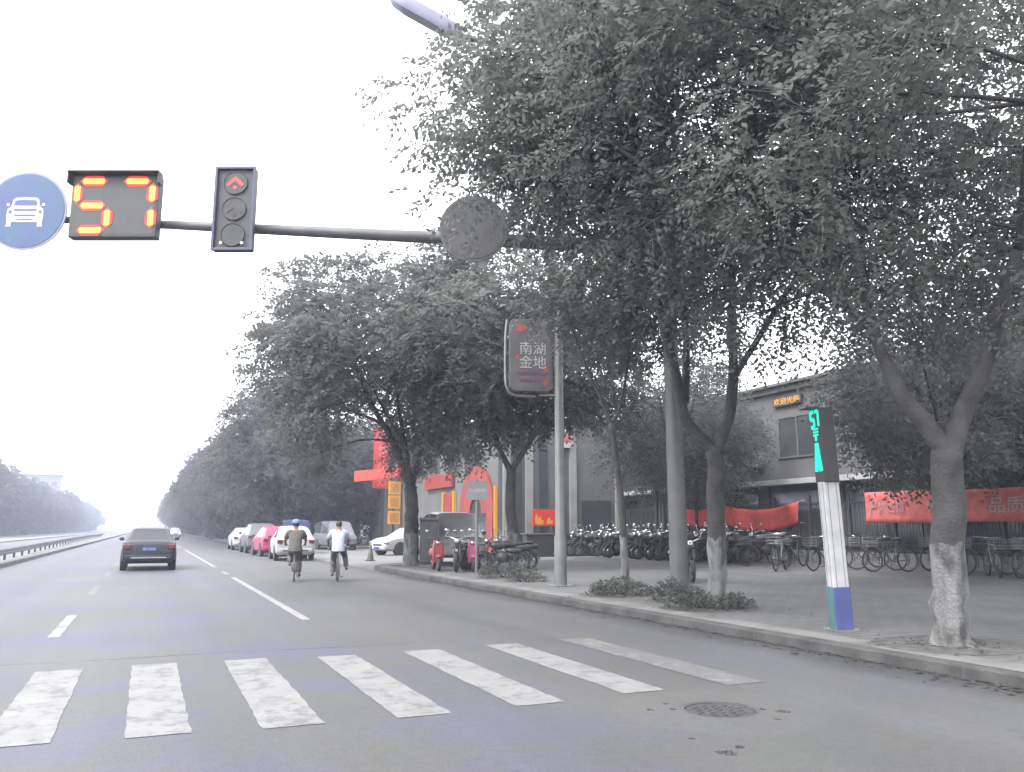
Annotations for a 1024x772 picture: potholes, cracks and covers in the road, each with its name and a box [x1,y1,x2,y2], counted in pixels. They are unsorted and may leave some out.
manhole cover [680,702,760,718]
